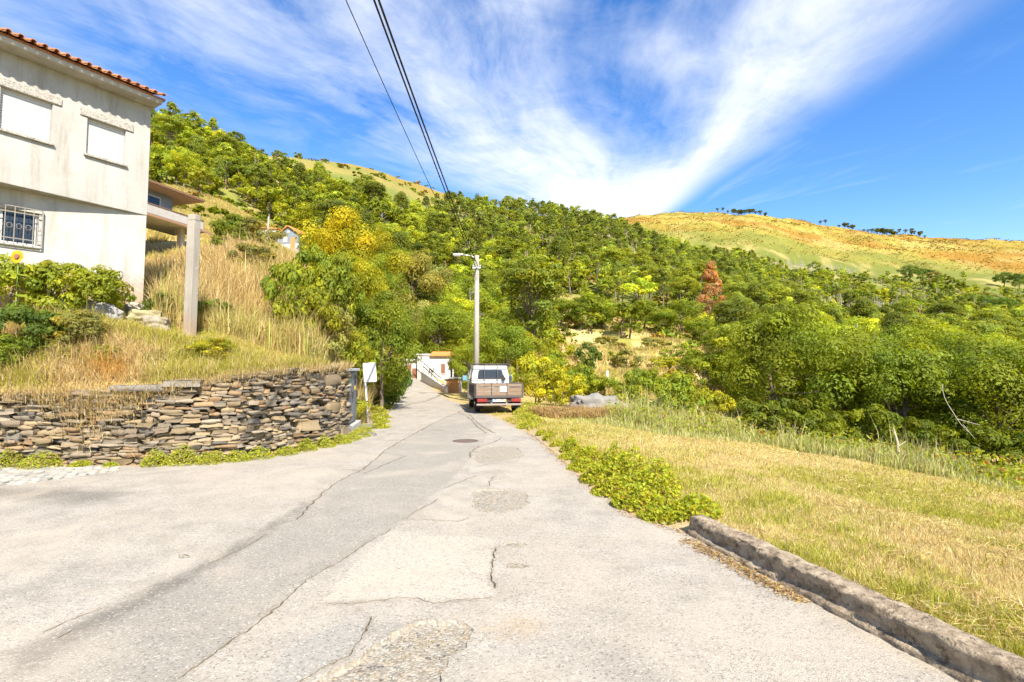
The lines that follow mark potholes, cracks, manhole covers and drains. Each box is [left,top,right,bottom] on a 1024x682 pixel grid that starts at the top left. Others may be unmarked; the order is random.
crack [299,548,496,682]
crack [402,412,511,522]
